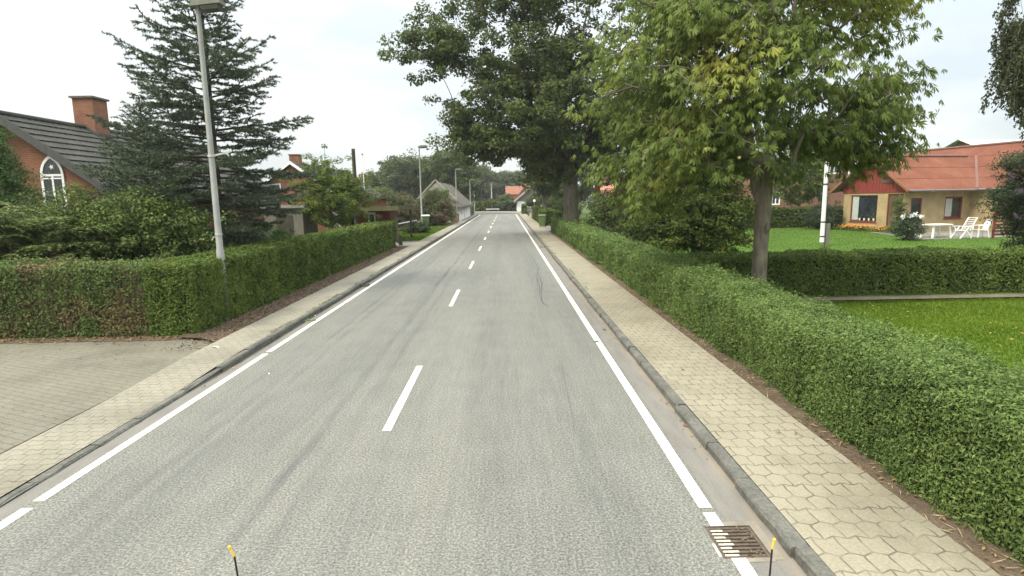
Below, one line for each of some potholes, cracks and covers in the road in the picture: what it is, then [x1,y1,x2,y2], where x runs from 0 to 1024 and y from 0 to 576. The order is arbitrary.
crack [525,249,548,306]
drain grate [705,521,785,562]
